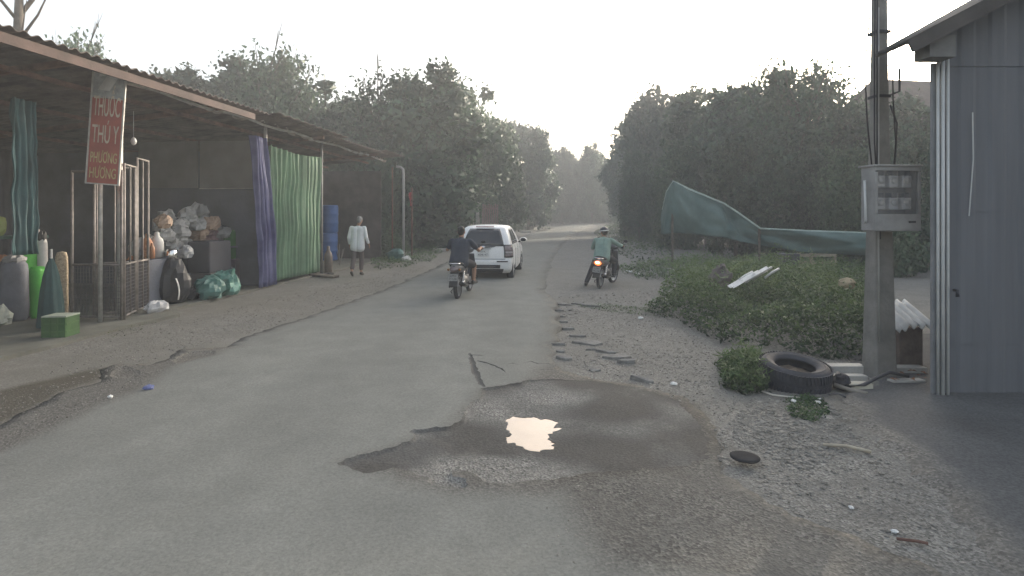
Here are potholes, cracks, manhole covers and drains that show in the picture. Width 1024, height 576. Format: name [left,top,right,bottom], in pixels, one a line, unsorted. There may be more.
pothole [337,379,711,489]
crack [468,353,558,387]
